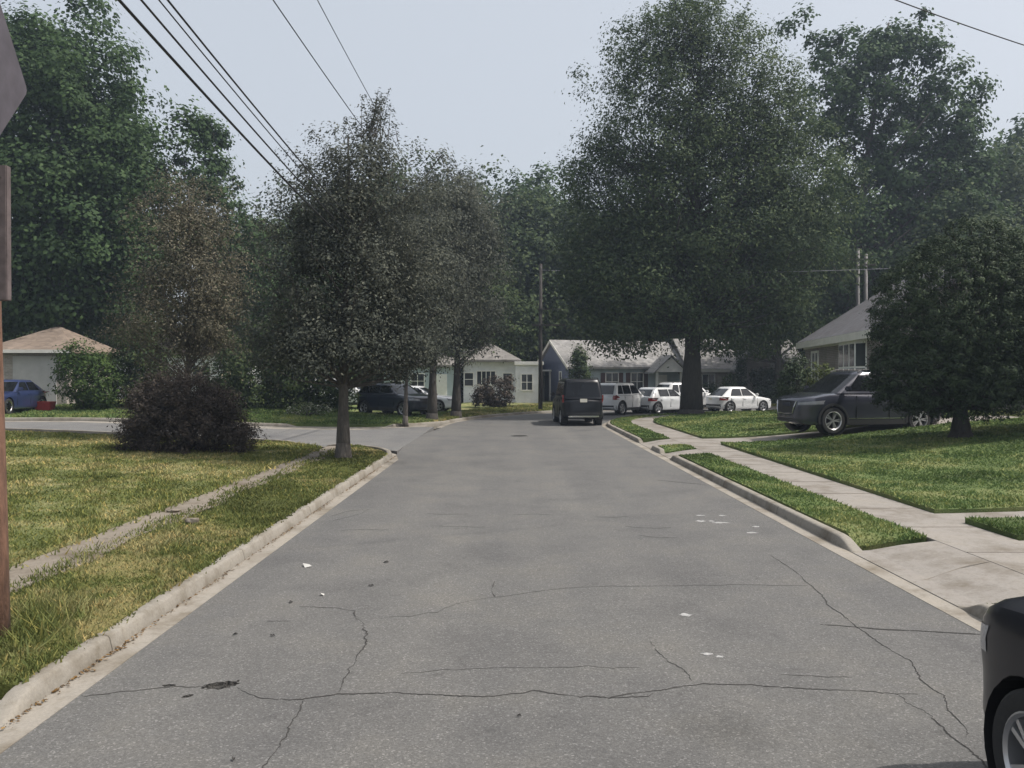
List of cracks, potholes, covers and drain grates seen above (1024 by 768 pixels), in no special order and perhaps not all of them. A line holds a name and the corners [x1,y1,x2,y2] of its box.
crack [88,557,988,768]
pothole [201,680,240,690]
